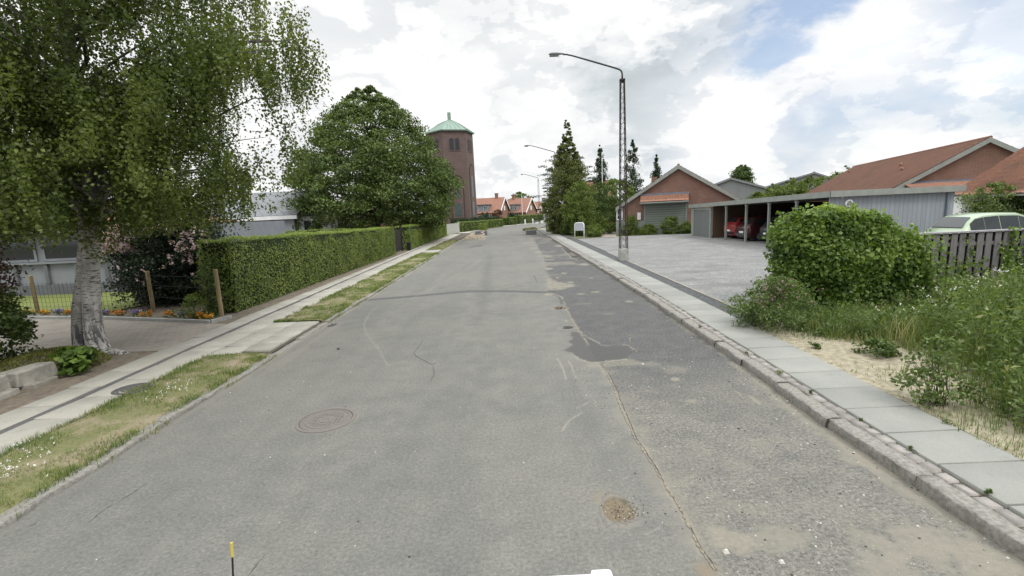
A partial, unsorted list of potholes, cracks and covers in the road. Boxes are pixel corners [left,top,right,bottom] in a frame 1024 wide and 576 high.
crack [563,298,717,570]
manhole cover [295,407,357,433]
pothole [598,491,671,528]
manhole cover [111,382,153,396]
